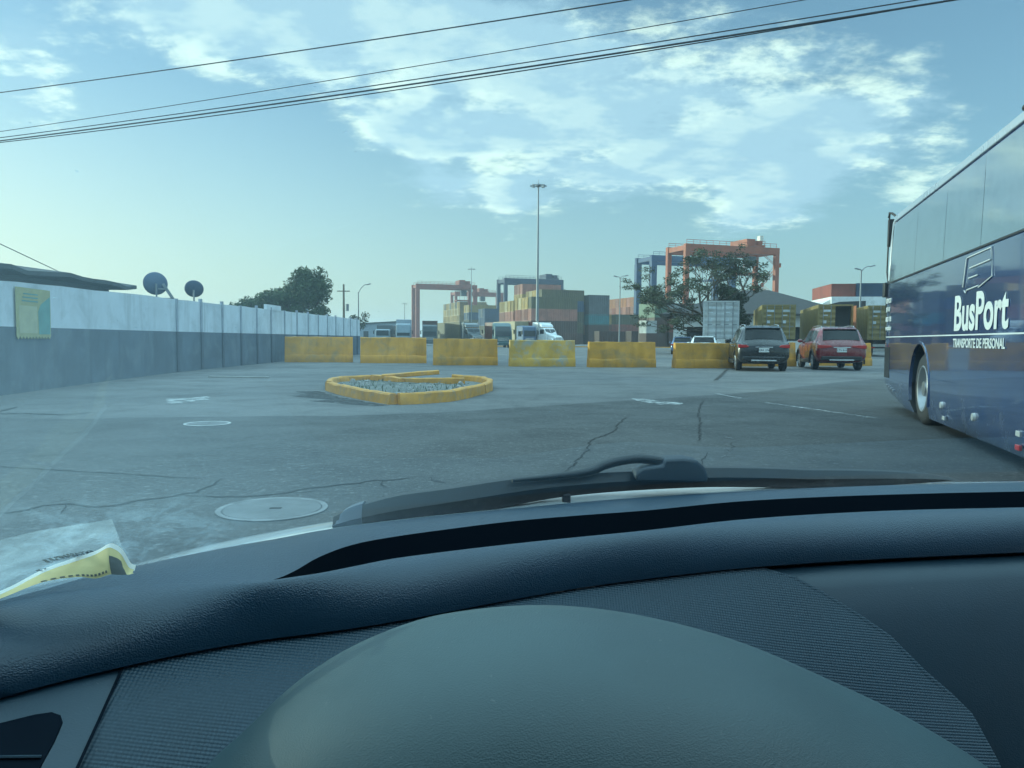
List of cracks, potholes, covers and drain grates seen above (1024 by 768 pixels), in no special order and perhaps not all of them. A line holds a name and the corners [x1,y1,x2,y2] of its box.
manhole cover [215,497,328,522]
crack [567,417,627,470]
crack [1,452,411,514]
crack [697,401,708,464]
